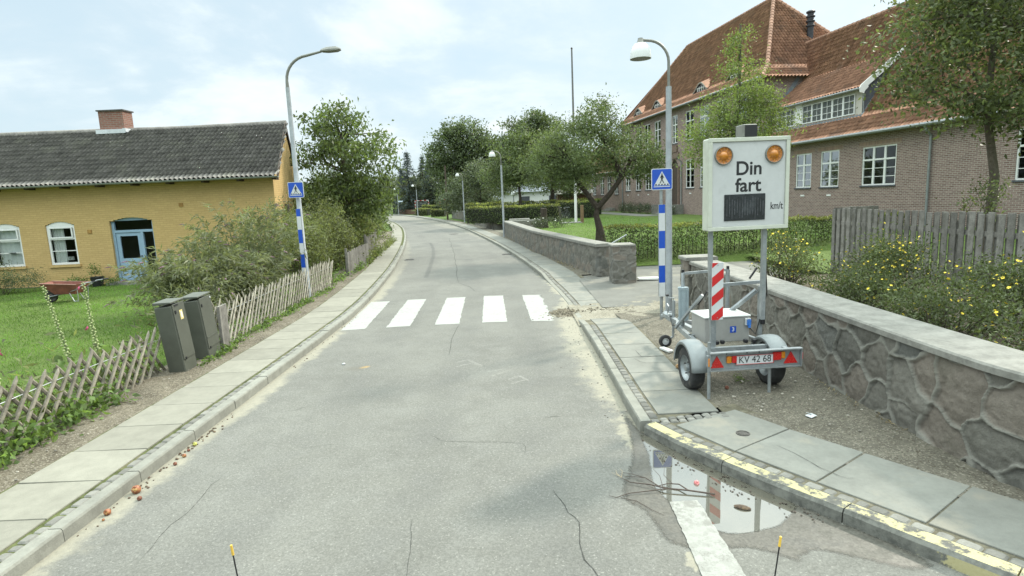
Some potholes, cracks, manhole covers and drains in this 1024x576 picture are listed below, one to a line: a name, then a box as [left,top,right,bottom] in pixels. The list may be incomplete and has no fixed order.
crack [553,490,598,576]
